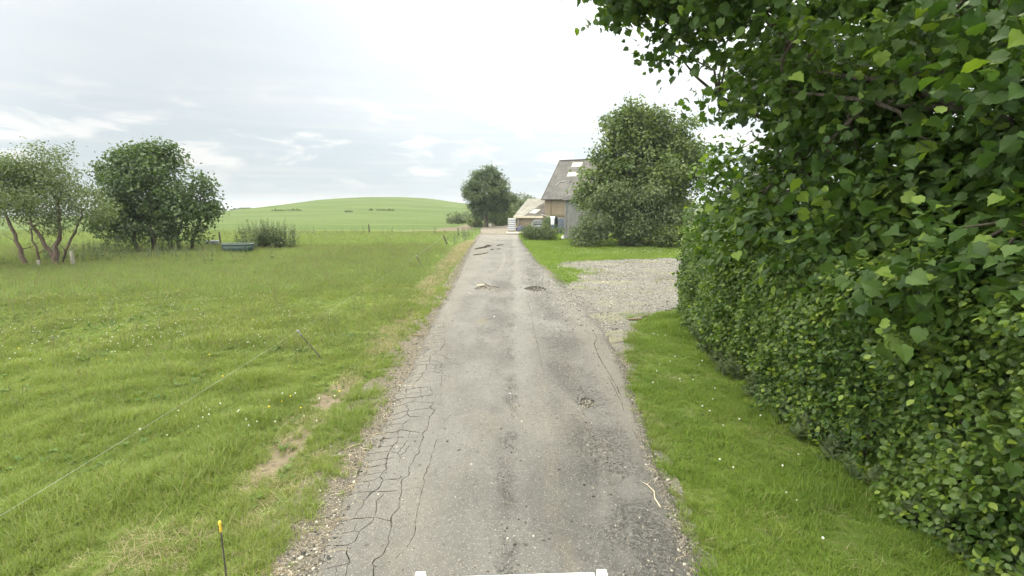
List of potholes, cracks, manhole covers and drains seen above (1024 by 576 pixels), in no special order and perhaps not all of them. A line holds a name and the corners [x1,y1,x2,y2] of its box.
pothole [579,397,595,408]
crack [315,306,469,576]
